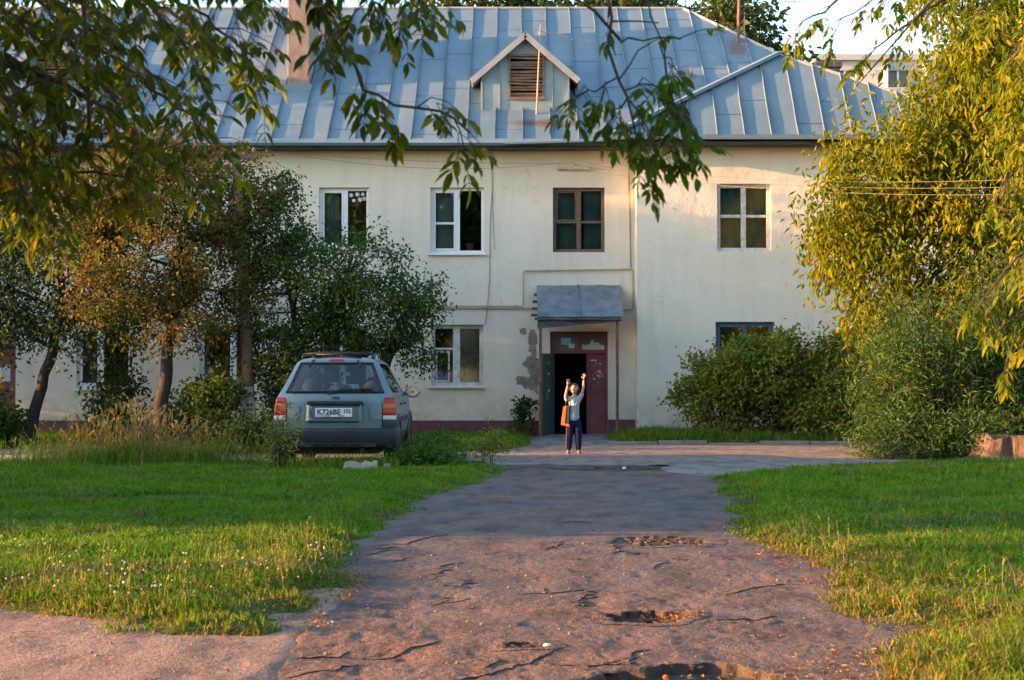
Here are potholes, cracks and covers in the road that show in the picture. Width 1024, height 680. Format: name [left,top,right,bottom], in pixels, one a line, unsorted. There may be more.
crack [282,640,439,678]
crack [364,534,479,604]
pothole [590,607,708,626]
pothole [589,534,726,548]
crack [511,588,603,608]
pothole [486,639,567,652]
pothole [556,660,816,680]
crack [456,649,650,680]
